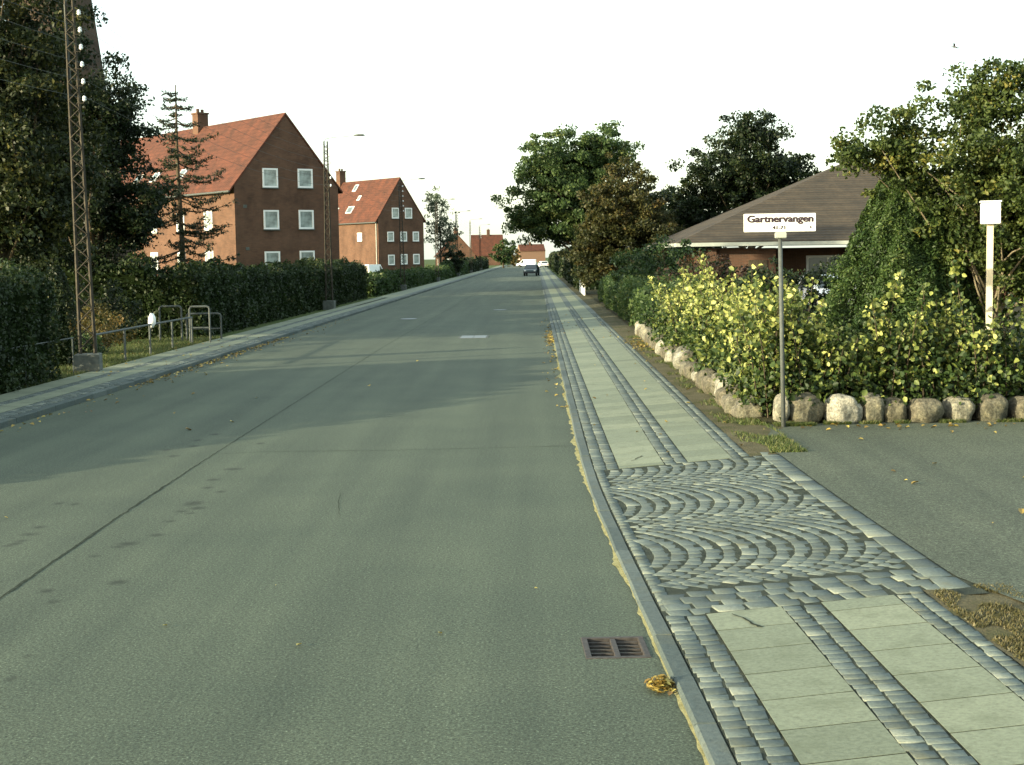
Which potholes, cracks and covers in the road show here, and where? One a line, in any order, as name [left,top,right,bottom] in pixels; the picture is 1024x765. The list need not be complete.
drain grate [581,636,652,659]
